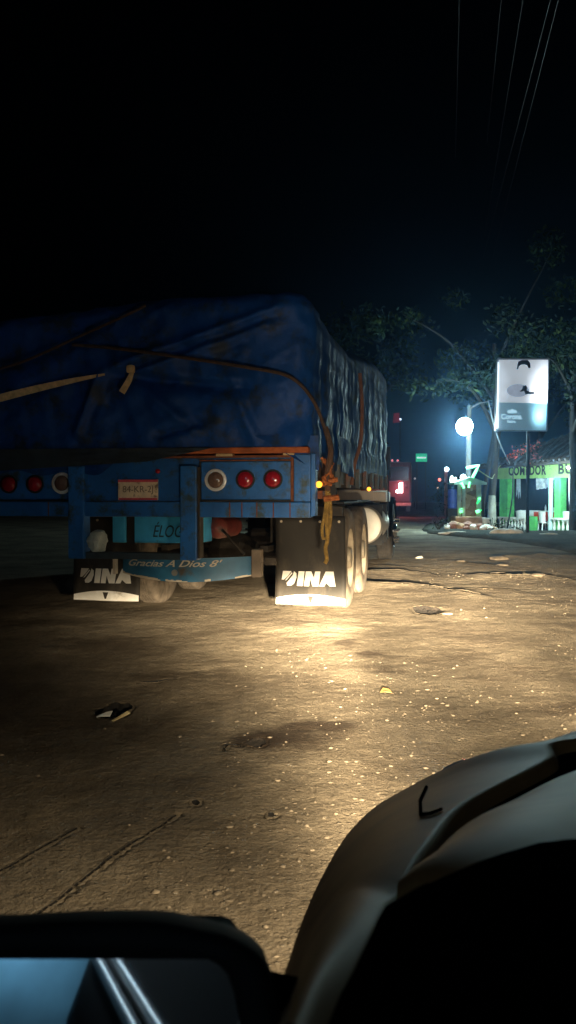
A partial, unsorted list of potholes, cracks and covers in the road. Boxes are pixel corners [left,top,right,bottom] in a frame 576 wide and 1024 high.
pothole [409,606,446,616]
pothole [244,737,269,749]
crack [366,553,575,595]
